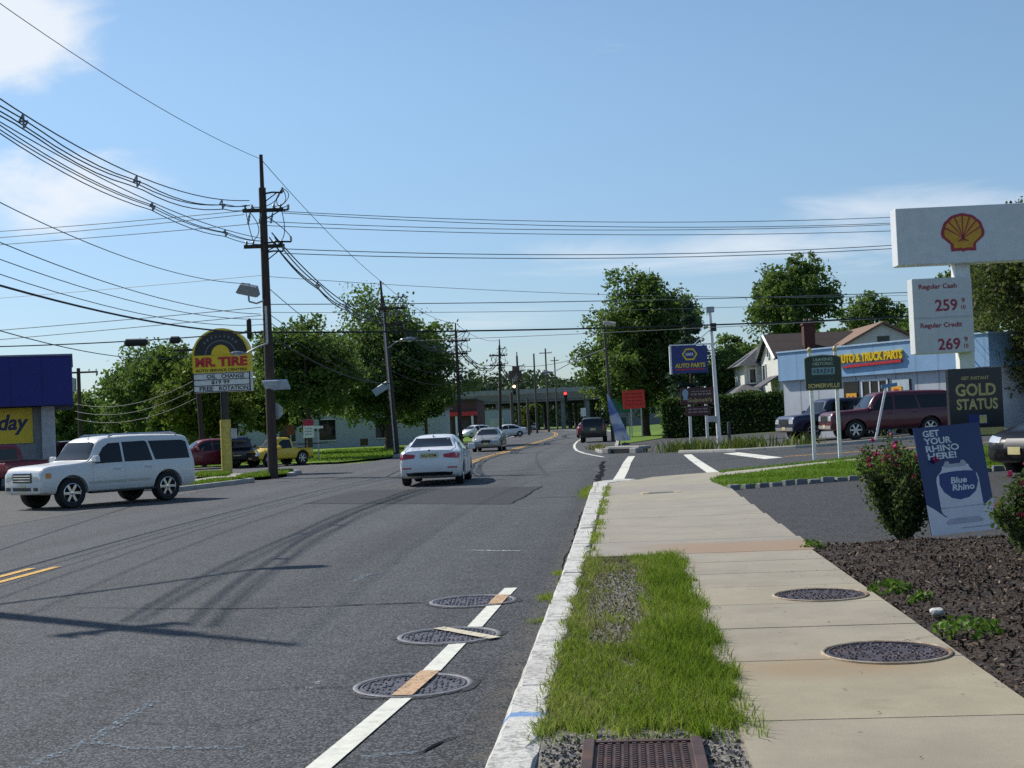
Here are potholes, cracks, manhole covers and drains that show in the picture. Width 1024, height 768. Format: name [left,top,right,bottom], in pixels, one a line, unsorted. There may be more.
manhole cover [772,588,869,602]
manhole cover [347,670,481,699]
manhole cover [425,594,523,608]
manhole cover [821,640,953,665]
crack [409,727,490,756]
manhole cover [391,626,507,646]
